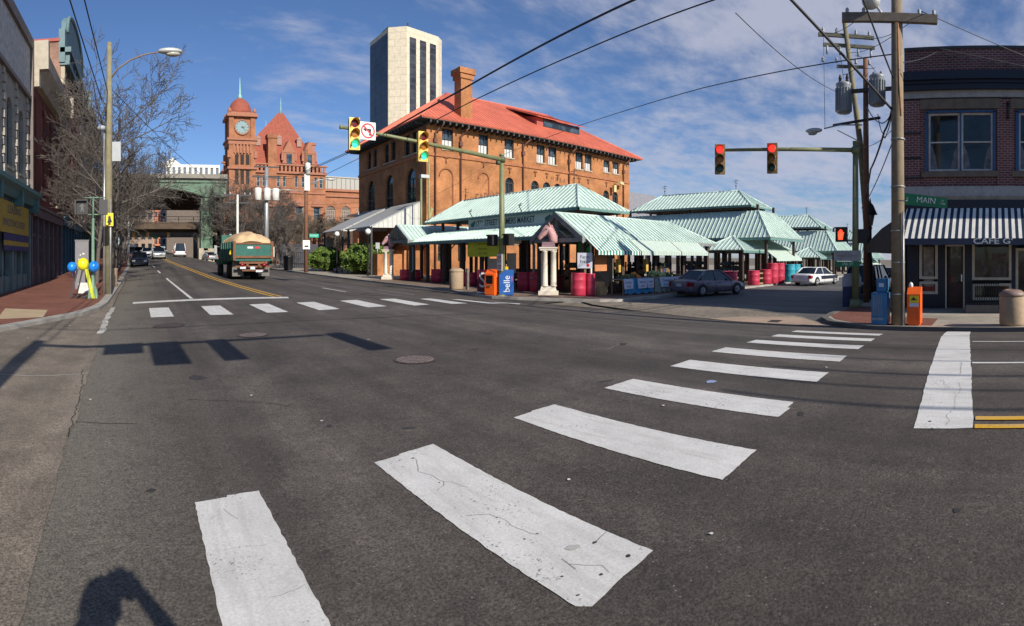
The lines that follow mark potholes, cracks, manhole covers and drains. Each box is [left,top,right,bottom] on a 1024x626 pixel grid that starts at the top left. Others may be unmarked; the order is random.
manhole cover [394,355,437,364]
